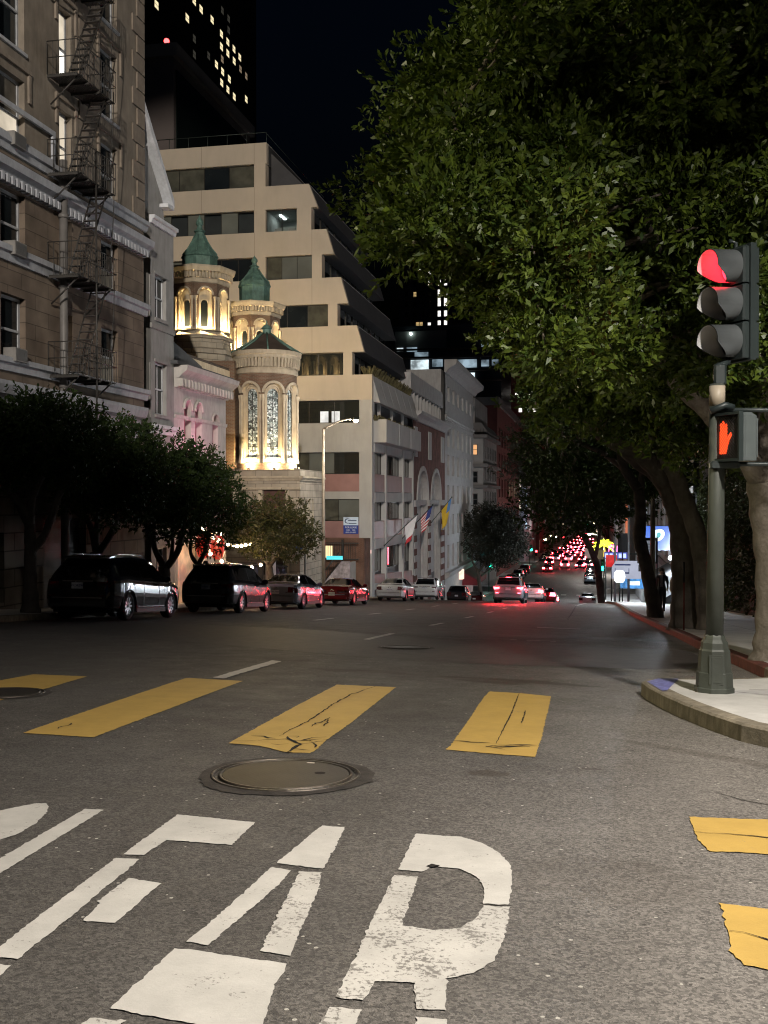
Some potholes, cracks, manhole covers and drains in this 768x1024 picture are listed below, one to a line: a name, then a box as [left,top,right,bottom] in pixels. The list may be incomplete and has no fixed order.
crack [251,686,375,752]
crack [454,740,530,749]
manhole cover [0,687,52,699]
manhole cover [198,757,375,796]
